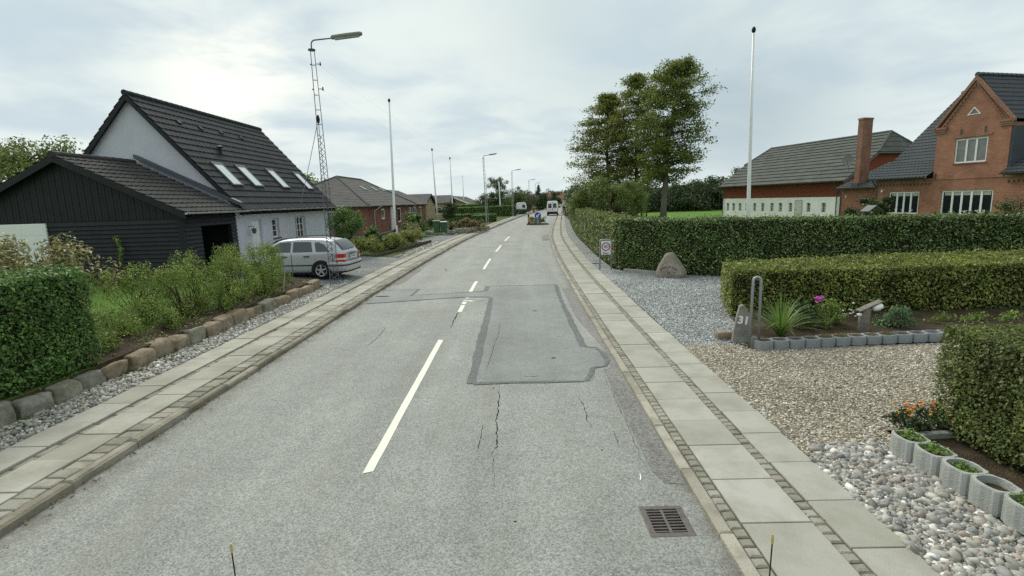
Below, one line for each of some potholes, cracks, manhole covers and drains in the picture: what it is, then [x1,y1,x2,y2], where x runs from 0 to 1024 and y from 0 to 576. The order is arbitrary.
drain grate [638,505,697,537]
crack [478,386,500,486]
